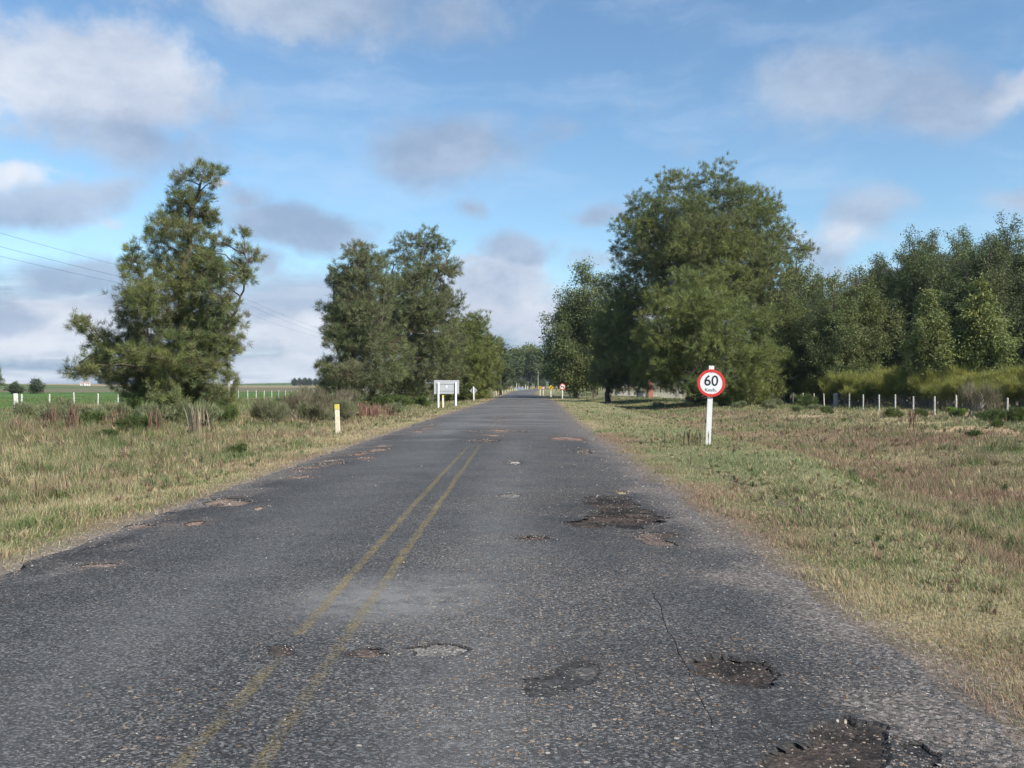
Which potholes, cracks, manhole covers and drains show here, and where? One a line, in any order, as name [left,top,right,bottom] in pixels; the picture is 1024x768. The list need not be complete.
crack [645,580,726,768]
pothole [898,740,943,768]
pothole [521,661,603,697]
pothole [631,532,680,547]
pothole [559,495,671,530]
pothole [267,644,297,658]
pothole [686,654,781,689]
pothole [341,647,391,658]
pothole [402,643,473,657]
pothole [202,497,256,506]
pothole [755,715,894,768]
